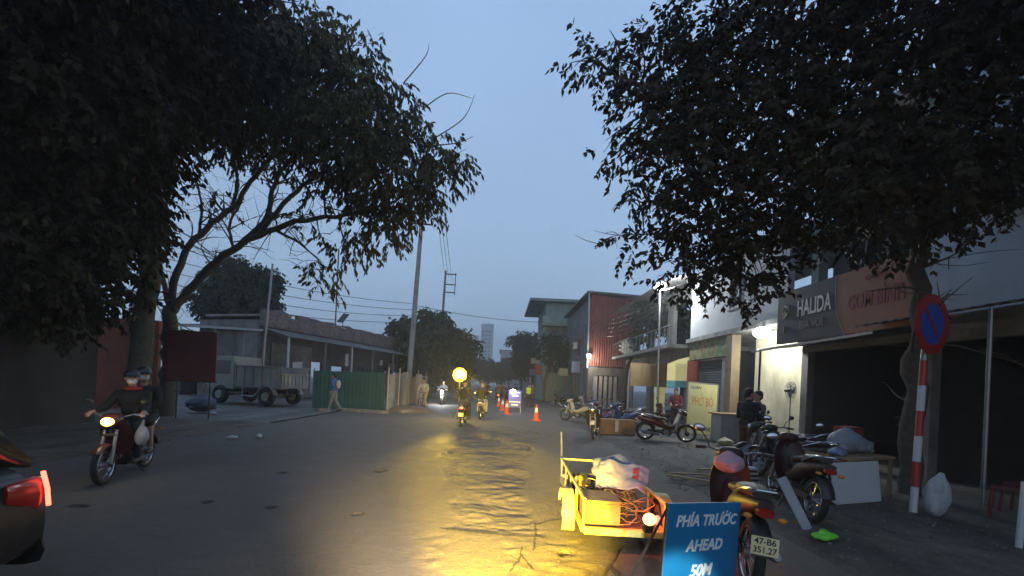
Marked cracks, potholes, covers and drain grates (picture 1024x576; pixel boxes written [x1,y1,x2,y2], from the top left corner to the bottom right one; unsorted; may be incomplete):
crack [442,519,560,573]
